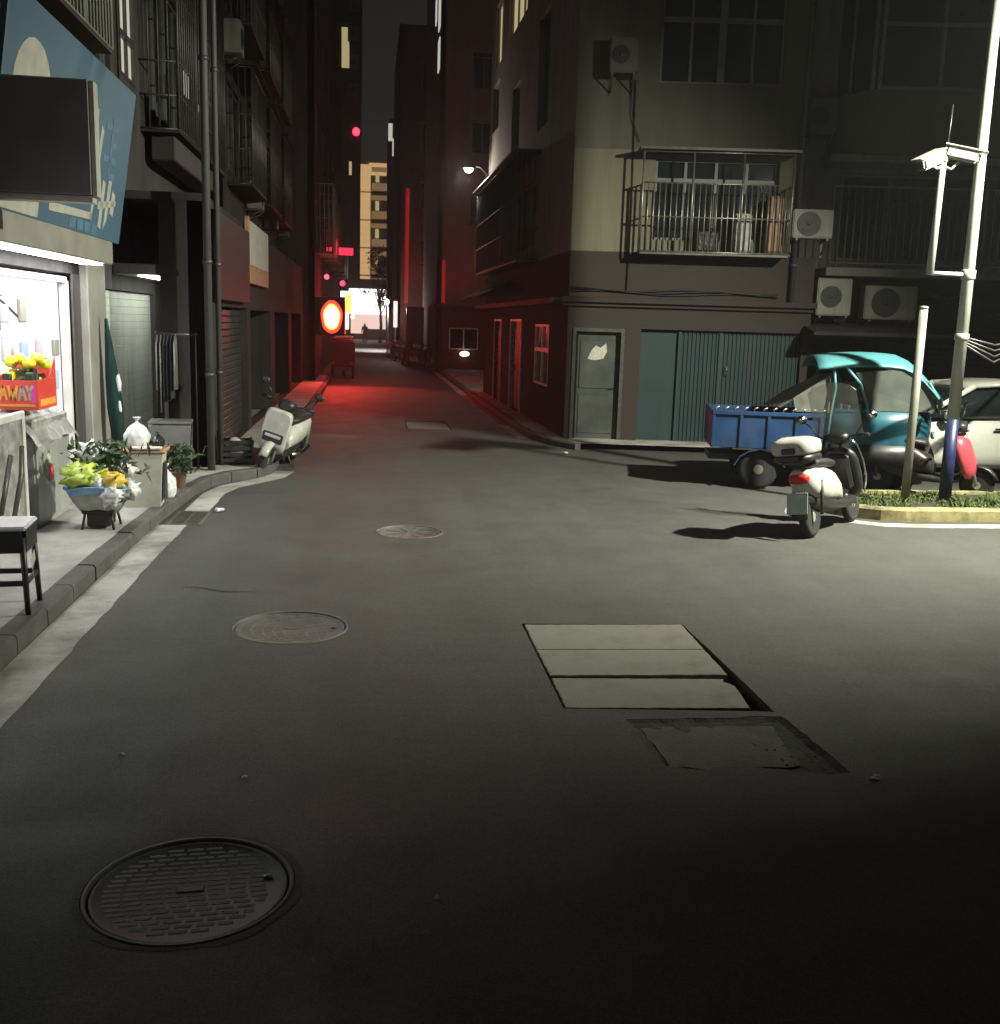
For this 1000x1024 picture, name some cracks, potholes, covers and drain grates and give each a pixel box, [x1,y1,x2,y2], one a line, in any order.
manhole cover [372,524,447,539]
manhole cover [70,833,303,951]
pothole [627,716,849,775]
manhole cover [227,609,354,645]
drain grate [165,511,212,525]
